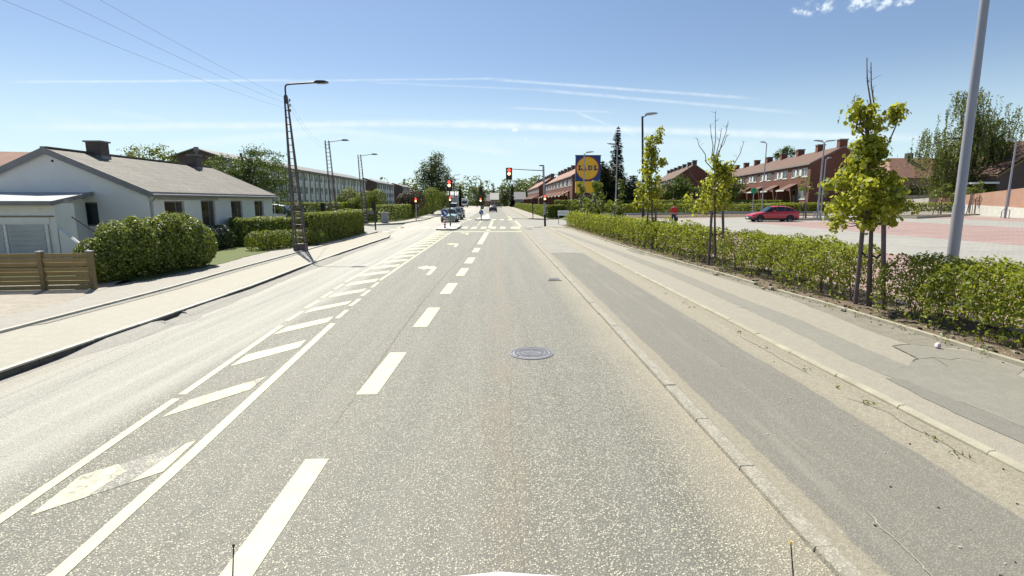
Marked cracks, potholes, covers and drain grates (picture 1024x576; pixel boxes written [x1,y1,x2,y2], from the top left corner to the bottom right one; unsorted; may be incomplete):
manhole cover [509,347,553,360]
crack [867,511,932,576]
crack [848,398,975,462]
